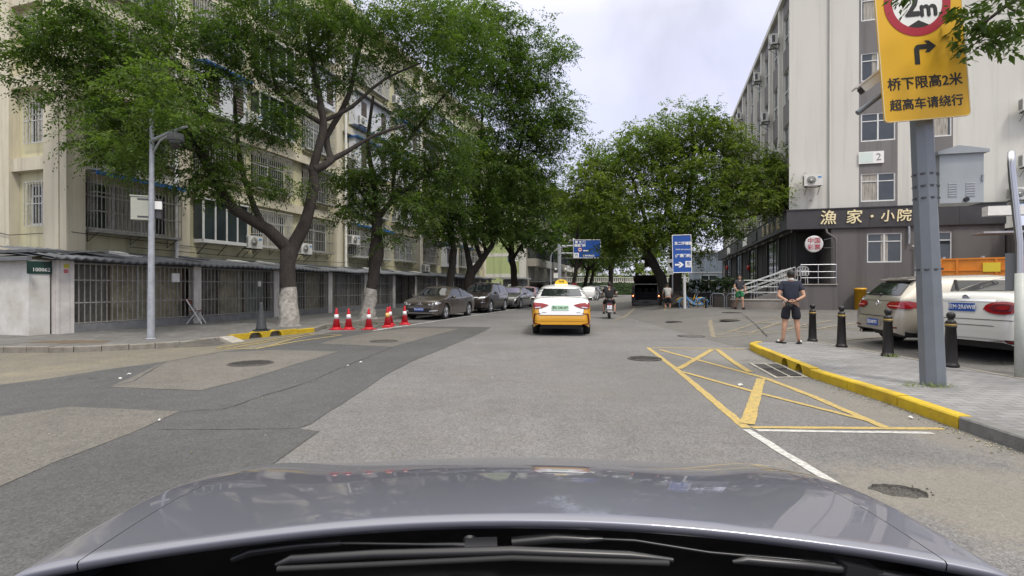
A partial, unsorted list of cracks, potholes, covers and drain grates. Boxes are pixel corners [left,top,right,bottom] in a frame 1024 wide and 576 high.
drain grate [749,362,808,379]
pothole [868,483,934,498]
